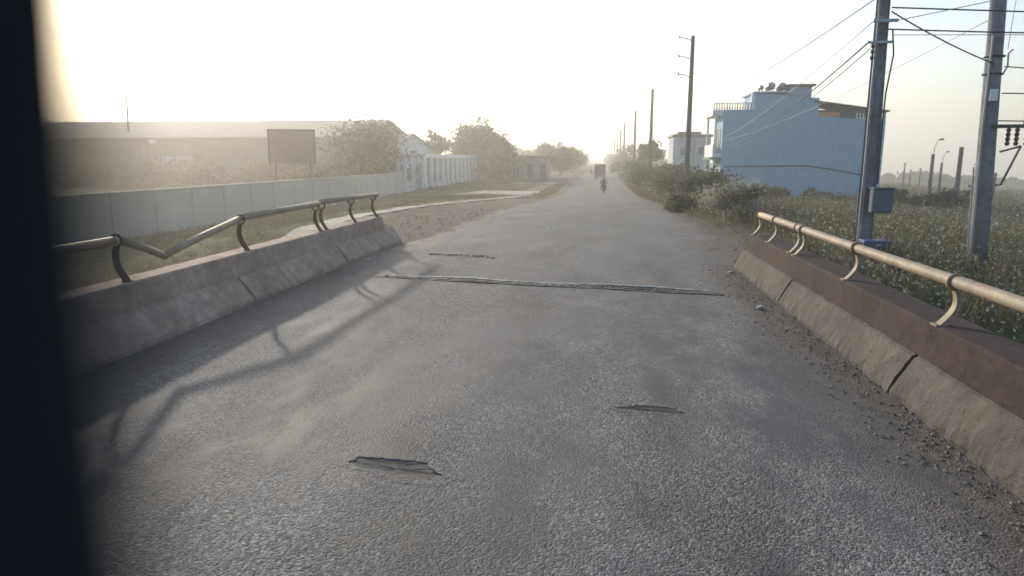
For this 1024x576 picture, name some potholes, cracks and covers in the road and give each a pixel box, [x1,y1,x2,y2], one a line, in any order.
pothole [326,452,466,487]
pothole [598,403,702,417]
